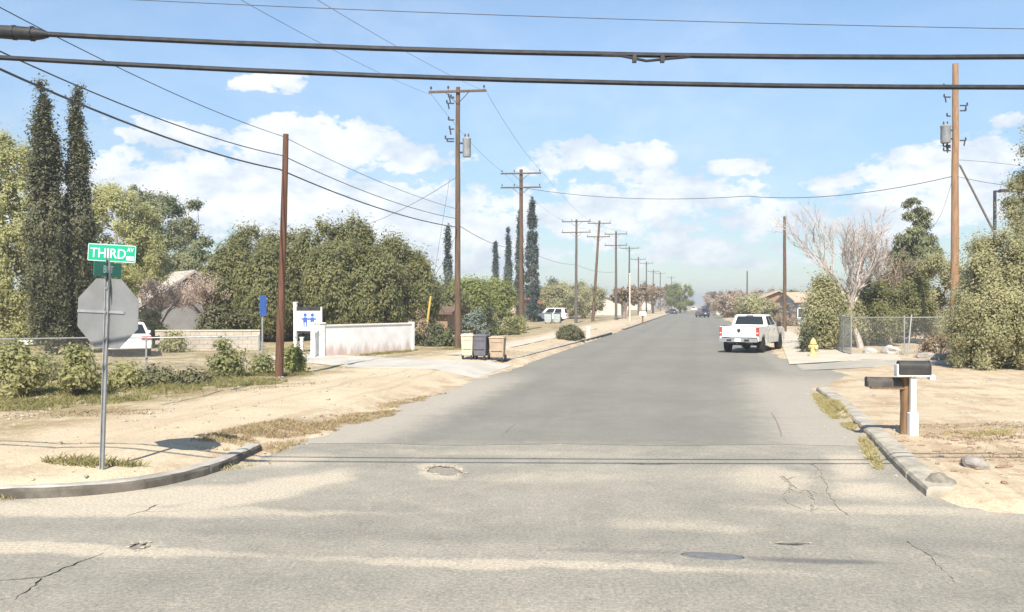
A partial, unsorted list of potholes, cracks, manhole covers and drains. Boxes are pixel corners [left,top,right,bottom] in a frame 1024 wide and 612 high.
crack [0,553,103,600]
crack [906,540,1019,606]
crack [779,464,849,516]
crack [127,504,175,516]
pothole [422,464,468,476]
manhole cover [681,552,745,560]
pothole [126,540,152,552]
